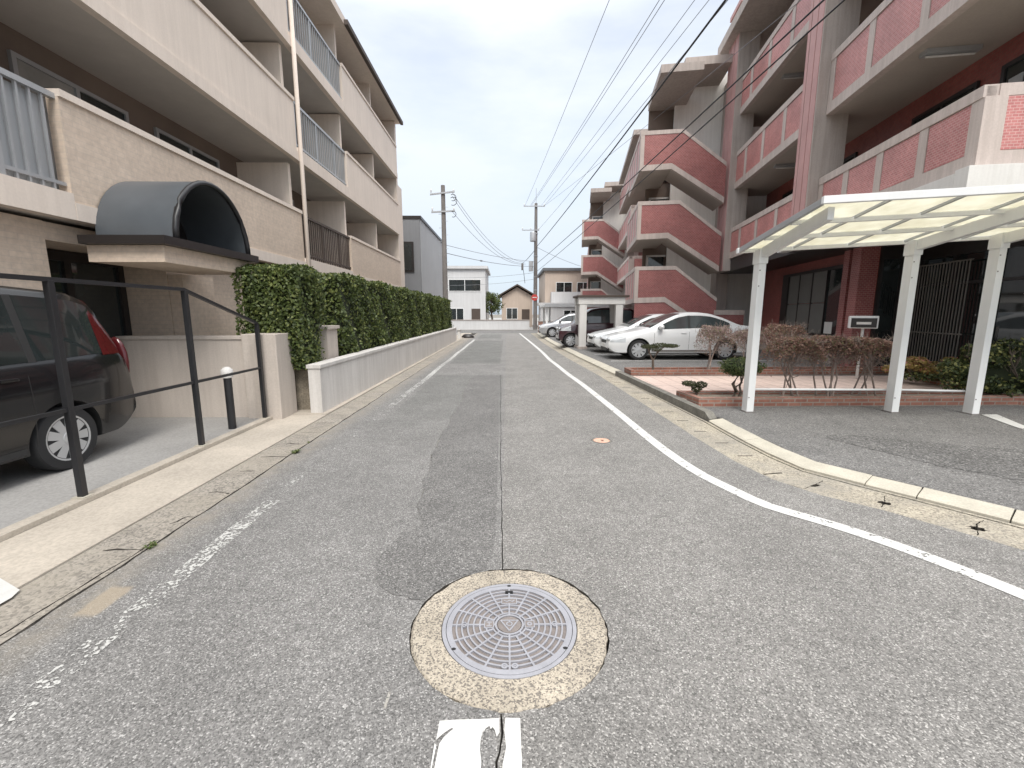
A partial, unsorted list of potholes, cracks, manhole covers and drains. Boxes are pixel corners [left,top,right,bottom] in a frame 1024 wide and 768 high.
crack [495,717,503,768]
manhole cover [410,570,608,713]
